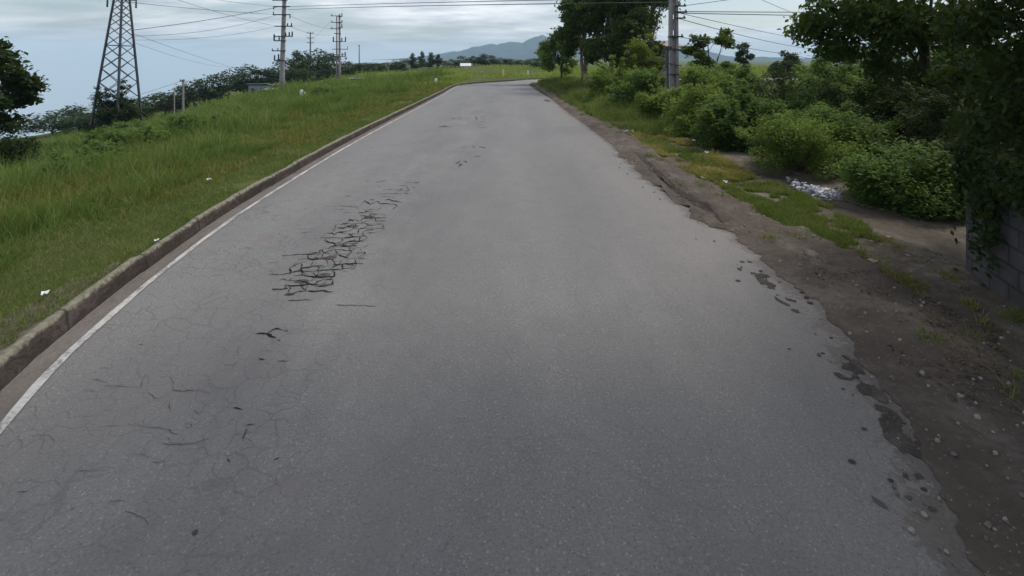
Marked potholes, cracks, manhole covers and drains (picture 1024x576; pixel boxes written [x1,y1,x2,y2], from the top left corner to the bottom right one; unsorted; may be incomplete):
crack [238,328,288,353]
pothole [751,272,776,289]
pothole [833,355,888,403]
crack [91,367,211,463]
pothole [875,404,922,459]
crack [247,180,418,306]
